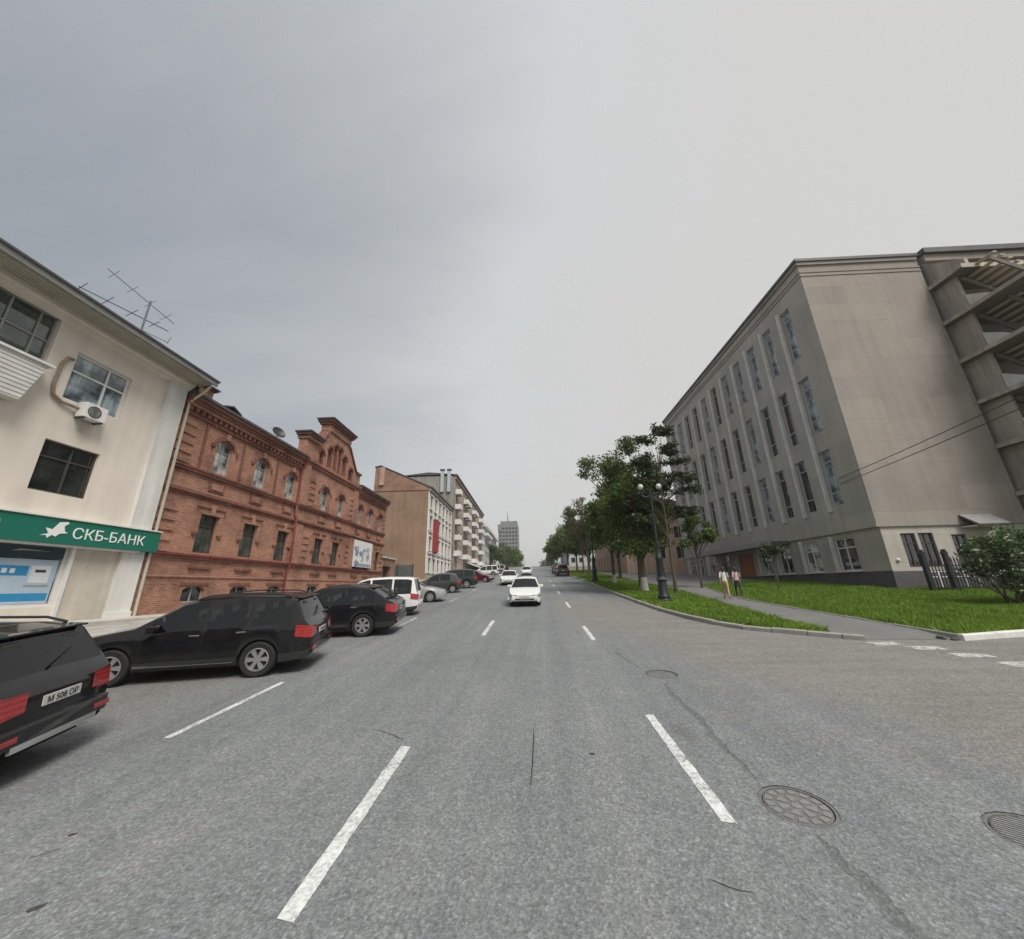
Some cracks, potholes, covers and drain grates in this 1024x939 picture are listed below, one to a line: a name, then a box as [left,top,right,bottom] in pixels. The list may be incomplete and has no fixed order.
manhole cover [645,670,679,679]
manhole cover [757,786,841,829]
manhole cover [981,812,1024,849]
crack [707,878,754,893]
